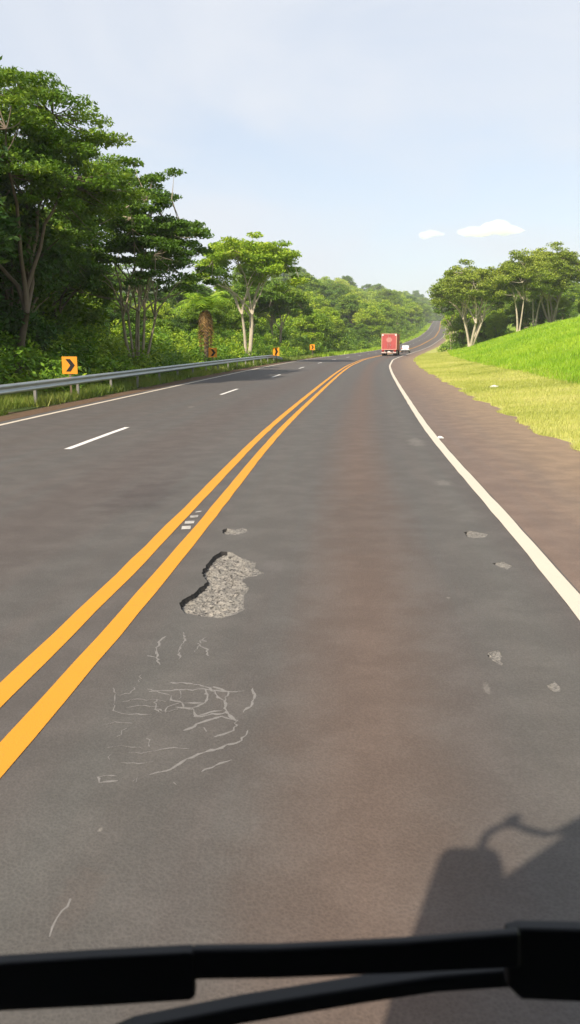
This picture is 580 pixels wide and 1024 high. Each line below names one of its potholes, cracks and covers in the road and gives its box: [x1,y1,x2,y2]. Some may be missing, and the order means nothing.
crack [49,898,72,937]
pothole [487,650,503,666]
pothole [179,551,263,618]
crack [147,632,209,664]
